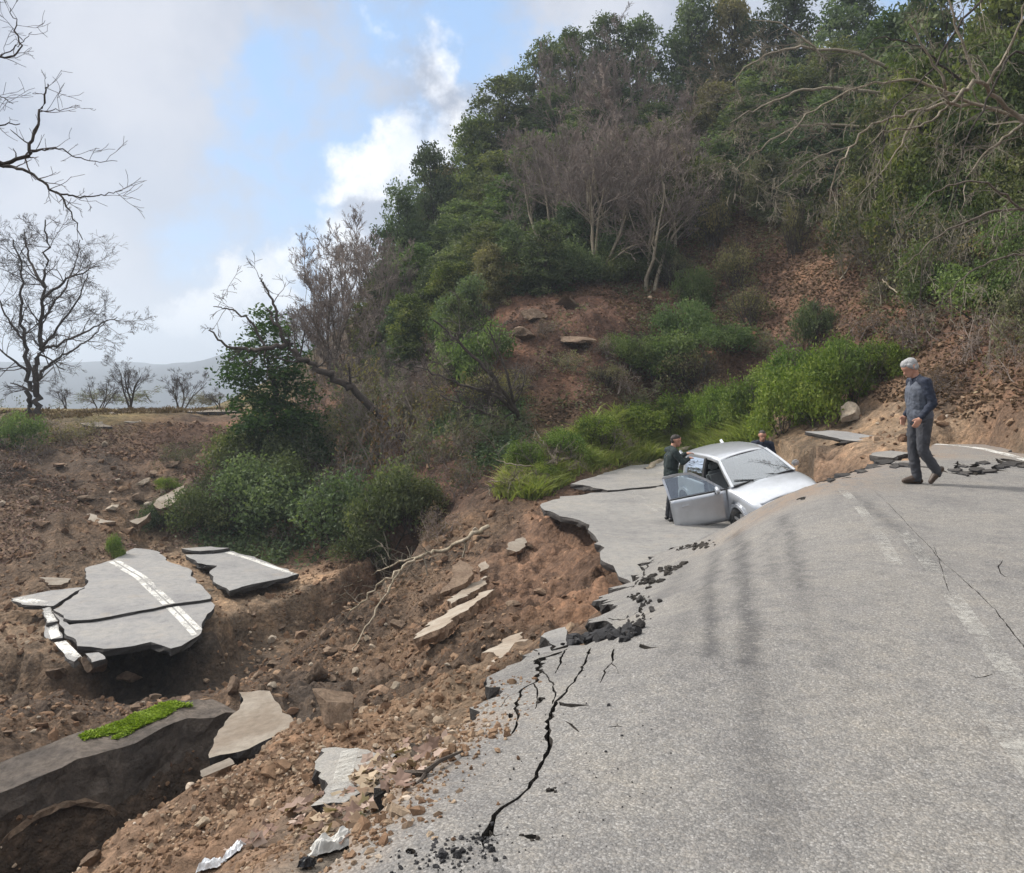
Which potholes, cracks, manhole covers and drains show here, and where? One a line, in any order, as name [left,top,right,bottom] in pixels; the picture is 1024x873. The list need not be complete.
crack [481,648,619,850]
